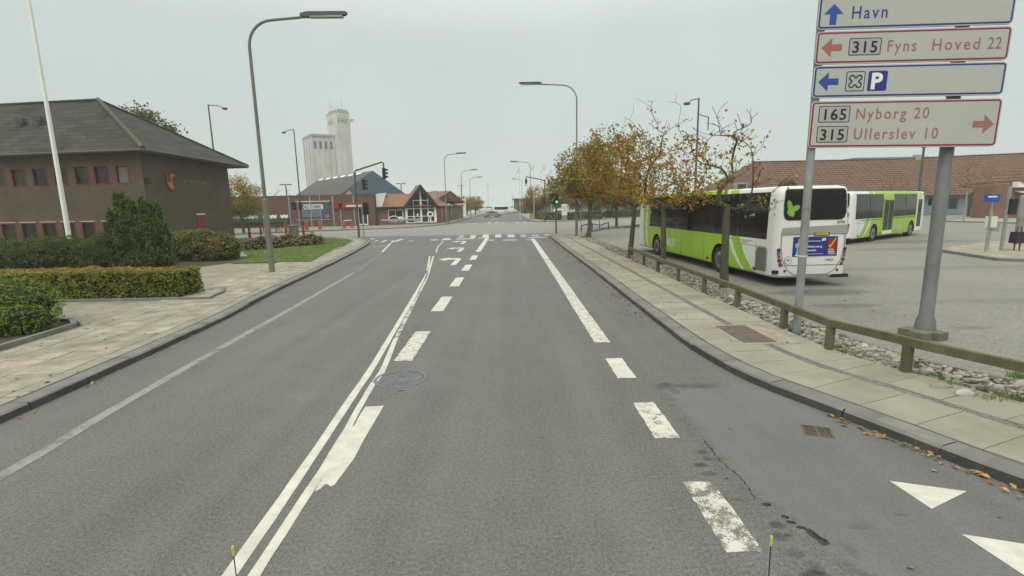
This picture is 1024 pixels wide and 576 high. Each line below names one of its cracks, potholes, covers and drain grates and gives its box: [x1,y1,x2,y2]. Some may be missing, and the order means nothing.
drain grate [800,424,836,439]
crack [704,440,757,499]
manhole cover [373,370,427,388]
utility cover [710,324,800,345]
